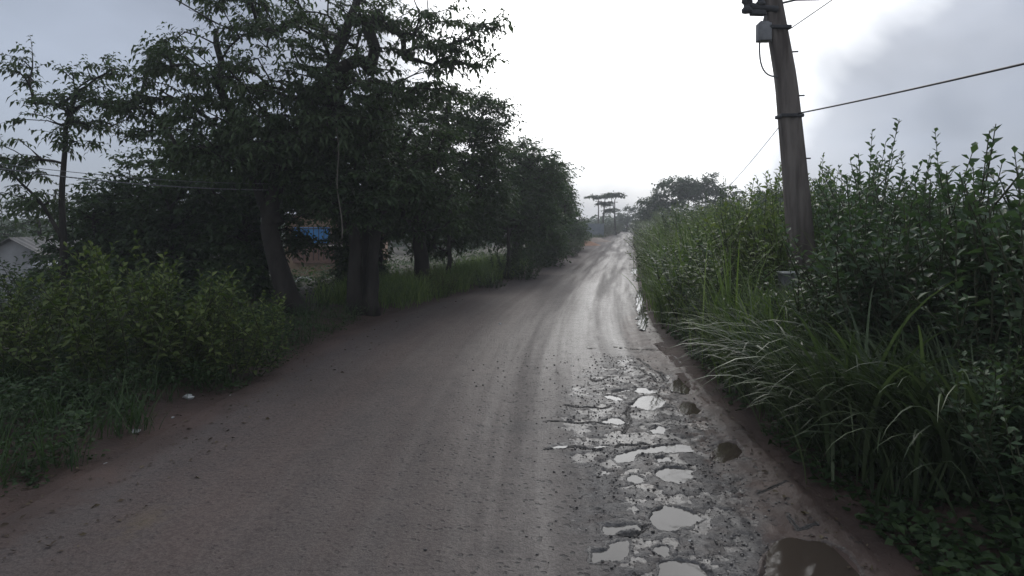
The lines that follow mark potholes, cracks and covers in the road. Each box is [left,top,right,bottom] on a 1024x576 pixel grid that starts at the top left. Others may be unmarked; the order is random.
crack [615,347,680,383]
pothole [655,555,714,576]
pothole [623,473,649,485]
pothole [627,395,666,411]
pothole [598,416,629,426]
pothole [645,504,706,533]
pothole [585,537,634,564]
pothole [629,386,660,395]
crack [542,404,650,452]
pothole [597,520,644,537]
pothole [652,464,698,485]
